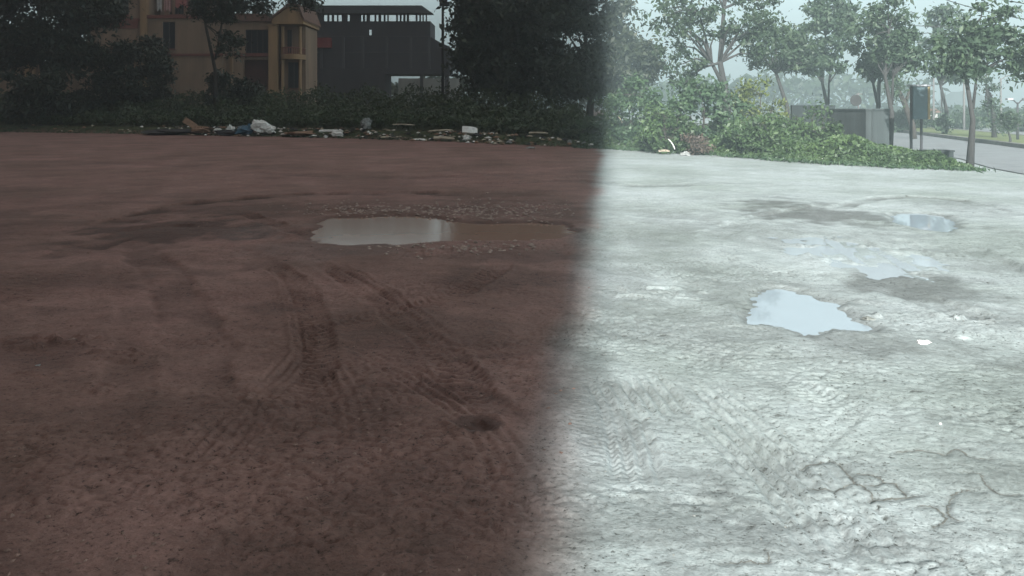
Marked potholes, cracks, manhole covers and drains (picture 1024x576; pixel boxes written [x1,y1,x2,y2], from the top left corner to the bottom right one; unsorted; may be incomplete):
pothole [878,209,975,233]
pothole [722,281,897,341]
pothole [286,210,591,248]
pothole [446,412,505,433]
crack [800,449,1019,528]
